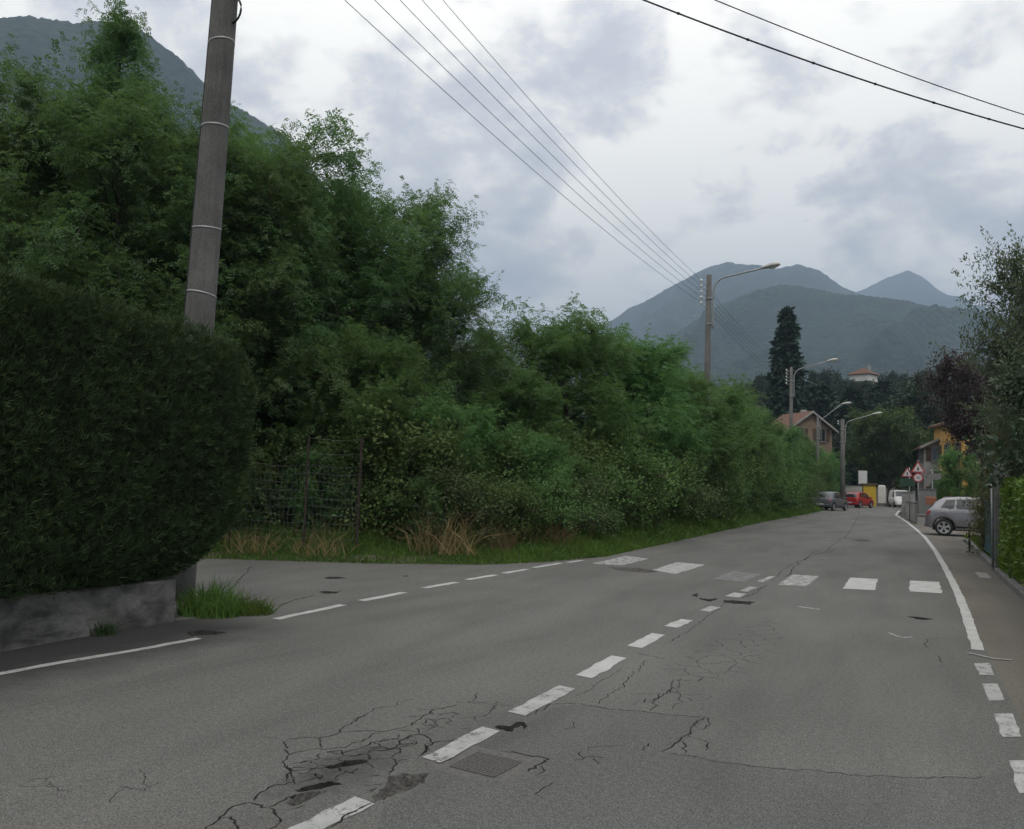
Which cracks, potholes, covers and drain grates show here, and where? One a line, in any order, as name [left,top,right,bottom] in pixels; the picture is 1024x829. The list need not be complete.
pothole [372,773,432,802]
crack [204,693,510,829]
crack [530,604,782,764]
pothole [295,781,342,792]
pothole [325,759,368,769]
crack [502,751,555,796]
crack [109,769,157,803]
crack [746,518,875,597]
pothole [495,722,527,732]
